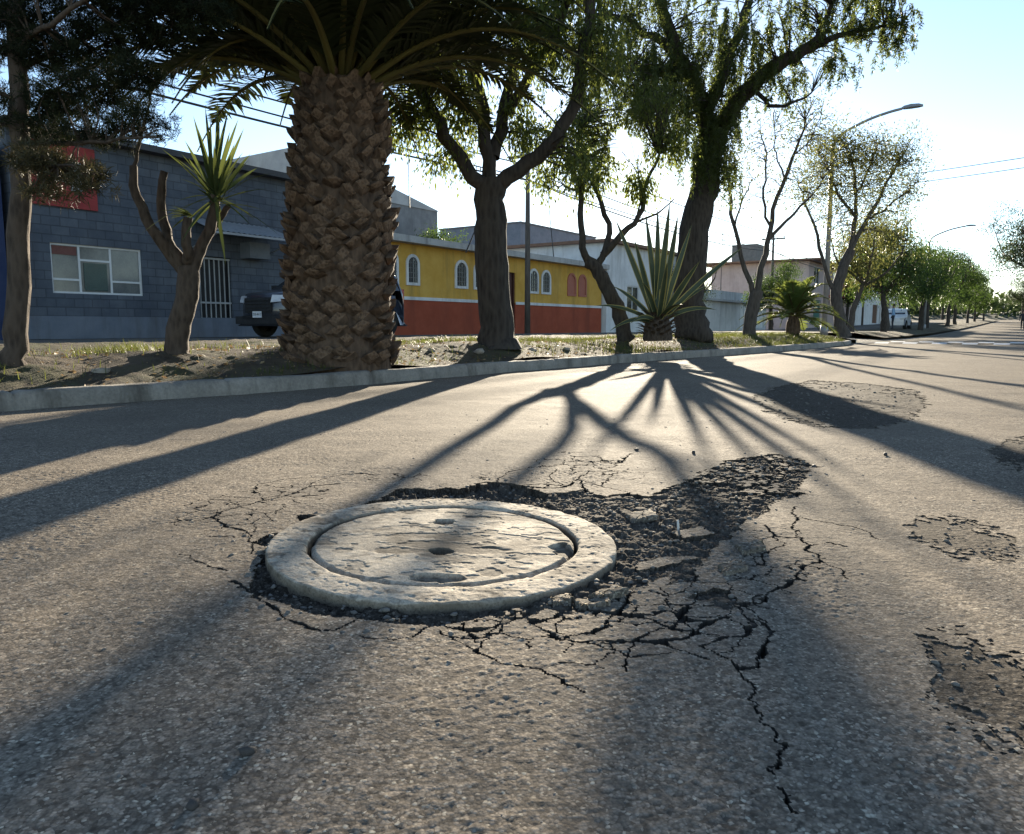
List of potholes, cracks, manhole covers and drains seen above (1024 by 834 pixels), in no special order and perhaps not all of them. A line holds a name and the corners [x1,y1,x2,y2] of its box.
pothole [902,514,1020,563]
crack [471,450,650,496]
pothole [913,625,1024,755]
crack [171,473,881,814]
manhole cover [265,499,617,616]
pothole [473,454,819,624]
